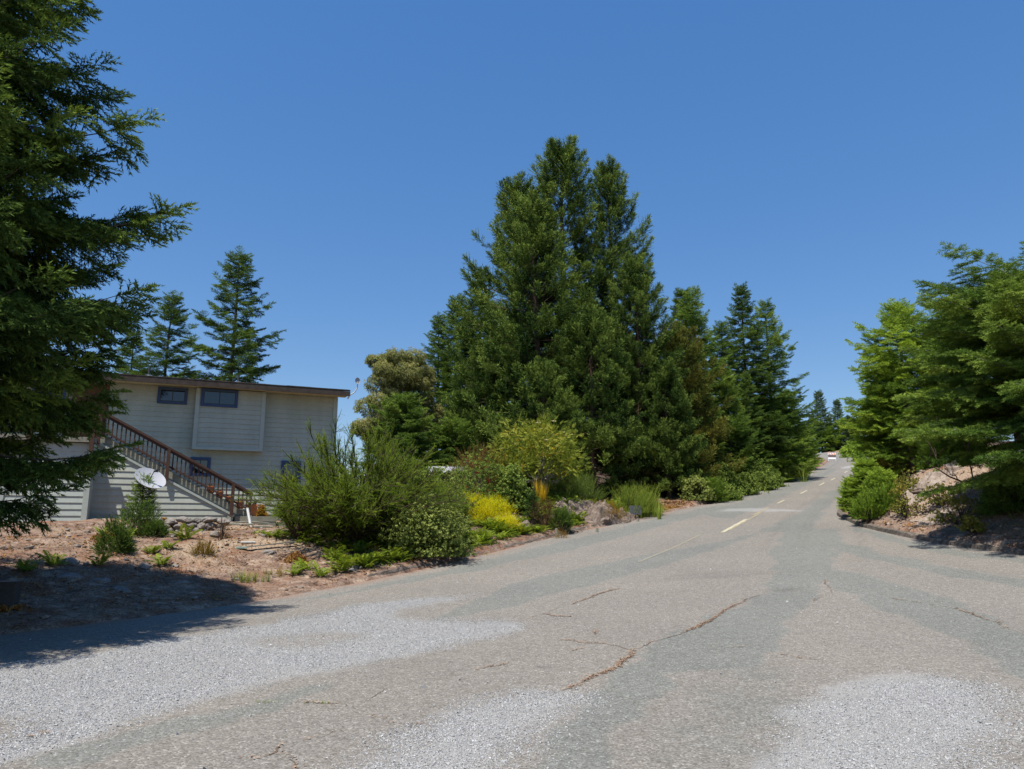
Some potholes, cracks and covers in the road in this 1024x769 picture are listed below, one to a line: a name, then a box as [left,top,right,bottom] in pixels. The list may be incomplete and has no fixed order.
crack [557,595,759,689]
